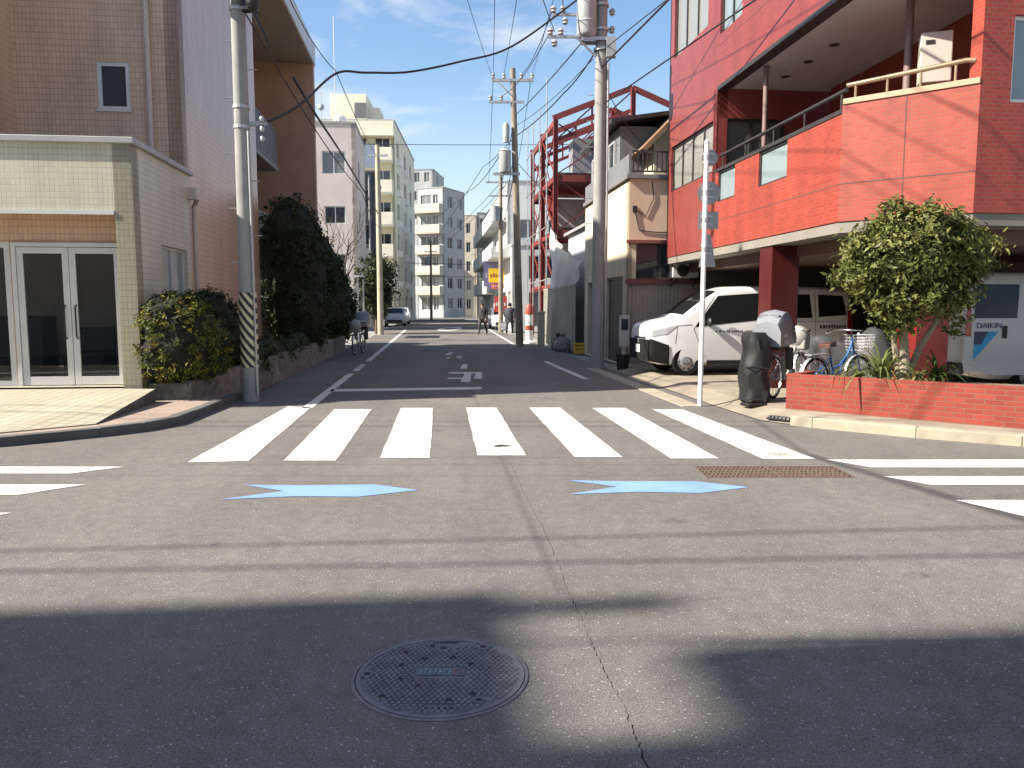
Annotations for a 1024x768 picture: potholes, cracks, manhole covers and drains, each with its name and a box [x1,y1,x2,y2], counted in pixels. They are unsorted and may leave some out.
crack [509,462,649,768]
manhole cover [351,636,529,722]
drain grate [694,466,857,478]
